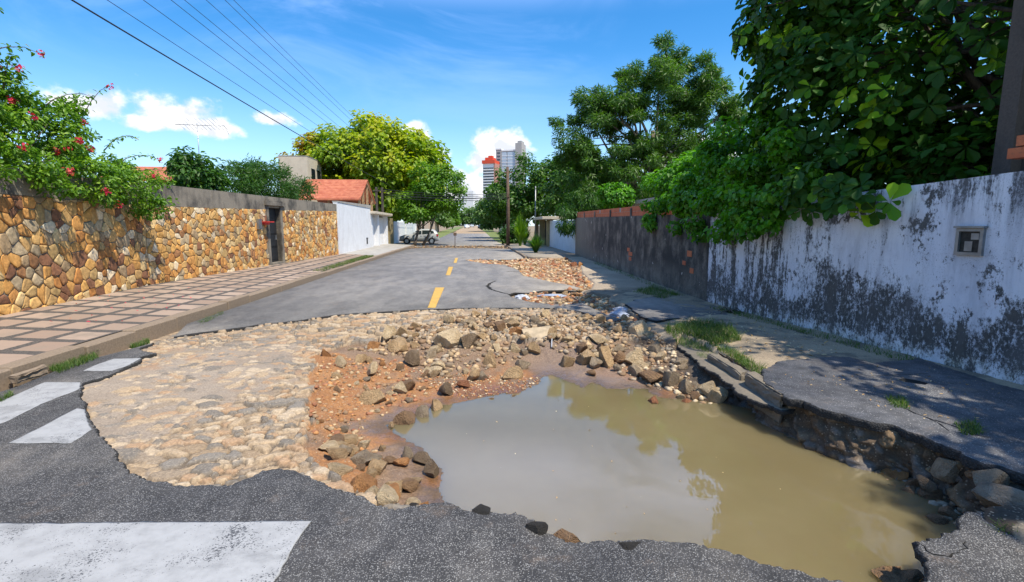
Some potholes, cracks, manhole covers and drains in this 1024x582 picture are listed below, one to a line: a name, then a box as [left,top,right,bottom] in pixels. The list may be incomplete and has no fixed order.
pothole [81,307,1024,516]
pothole [514,292,648,323]
crack [904,408,990,438]
pothole [472,258,595,294]
